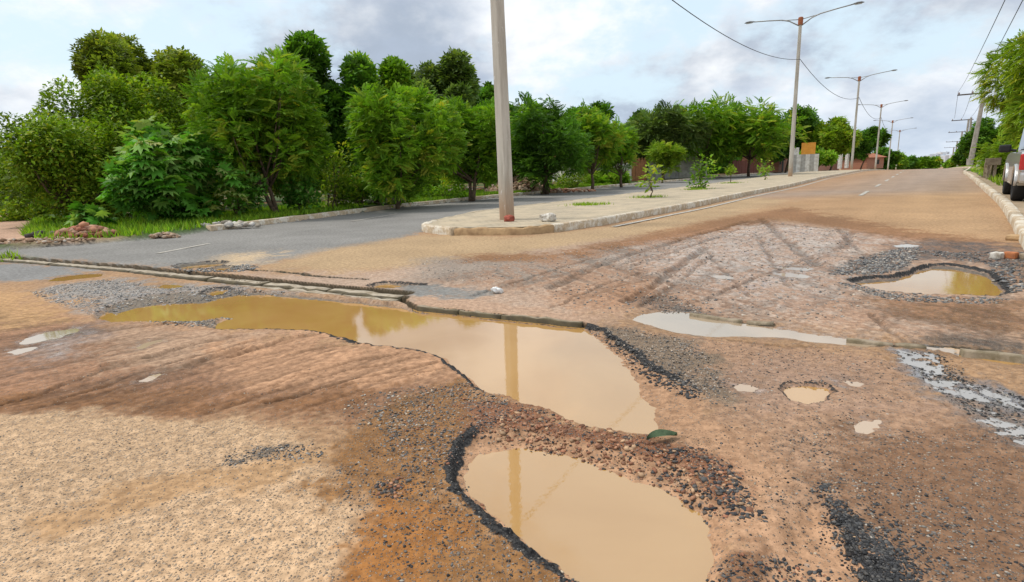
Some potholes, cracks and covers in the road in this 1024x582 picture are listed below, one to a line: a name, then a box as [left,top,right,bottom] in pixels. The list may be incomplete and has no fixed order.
pothole [847,263,1013,296]
pothole [774,379,842,405]
pothole [91,287,715,440]
pothole [444,417,748,582]
